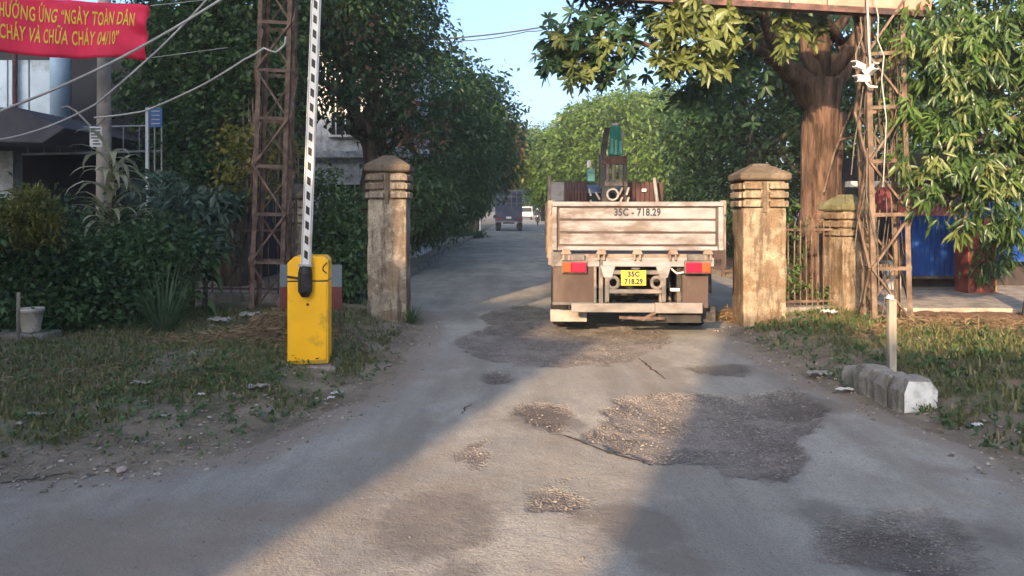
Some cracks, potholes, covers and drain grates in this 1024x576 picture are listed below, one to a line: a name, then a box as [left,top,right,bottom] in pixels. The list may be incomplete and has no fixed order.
pothole [510,398,580,434]
pothole [577,385,838,486]
pothole [519,478,599,518]
pothole [443,439,494,471]
